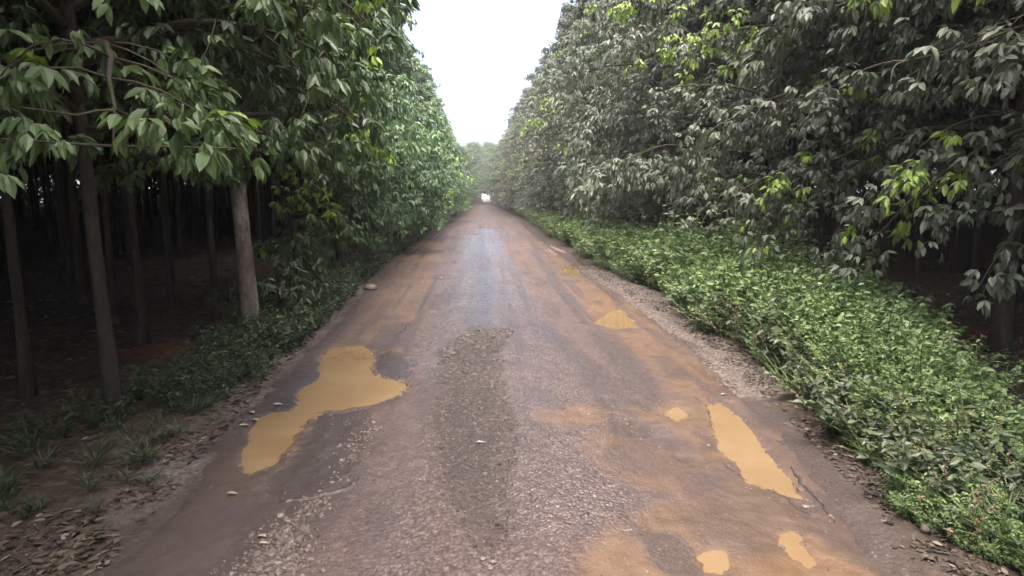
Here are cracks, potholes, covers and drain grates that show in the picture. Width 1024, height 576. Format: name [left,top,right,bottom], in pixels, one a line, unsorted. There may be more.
pothole [232,344,410,478]
pothole [560,265,584,275]
pothole [659,404,695,423]
pothole [688,544,744,576]
pothole [251,407,372,497]
crack [723,463,835,522]
pothole [589,308,642,330]
pothole [769,523,829,575]
pothole [702,400,809,504]
